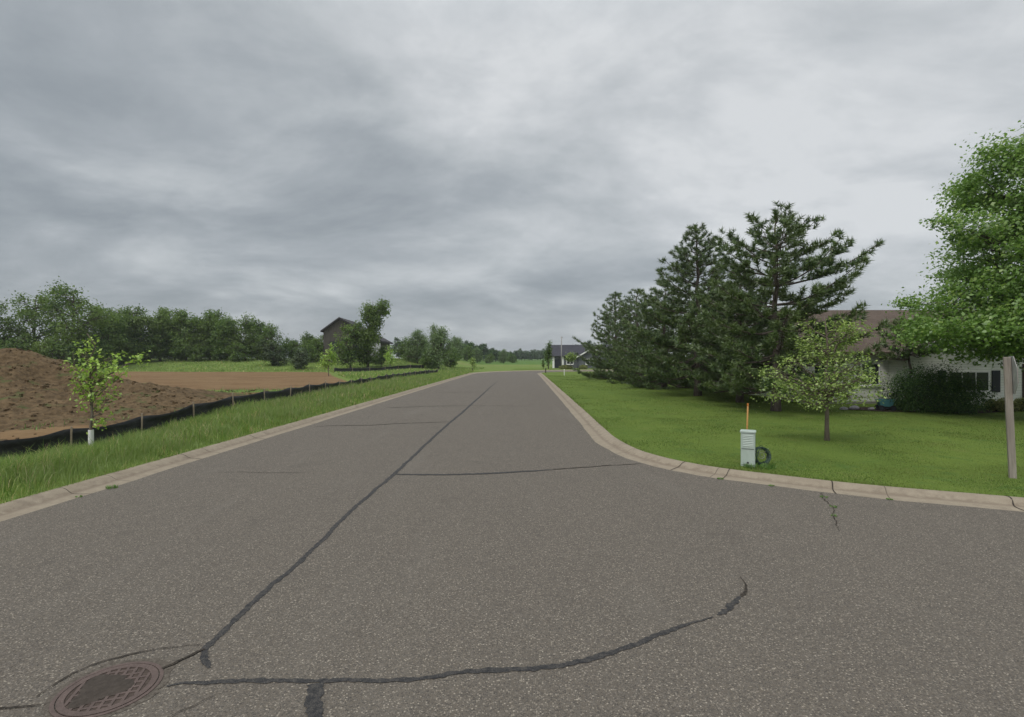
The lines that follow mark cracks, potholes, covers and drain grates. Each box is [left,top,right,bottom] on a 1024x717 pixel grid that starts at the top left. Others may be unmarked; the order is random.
manhole cover [49,661,164,717]
crack [740,577,748,597]
